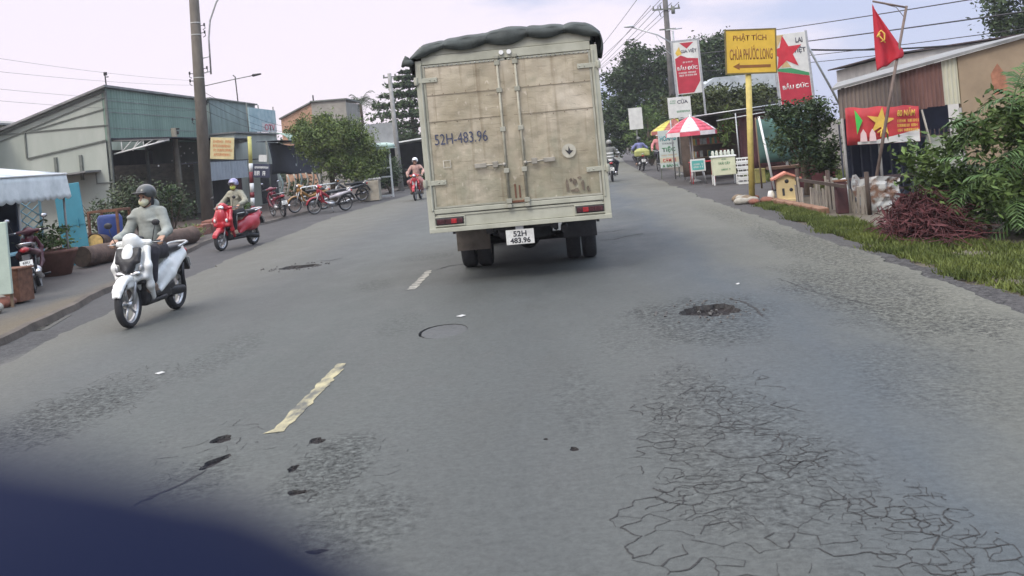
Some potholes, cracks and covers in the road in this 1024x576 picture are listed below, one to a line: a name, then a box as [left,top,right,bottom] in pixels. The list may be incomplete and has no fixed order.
crack [609,355,1024,576]
pothole [654,297,765,323]
crack [290,433,408,522]
manhole cover [418,324,467,339]
pothole [260,262,330,272]
pothole [210,435,231,443]
crack [1,363,179,451]
pothole [199,454,231,470]
